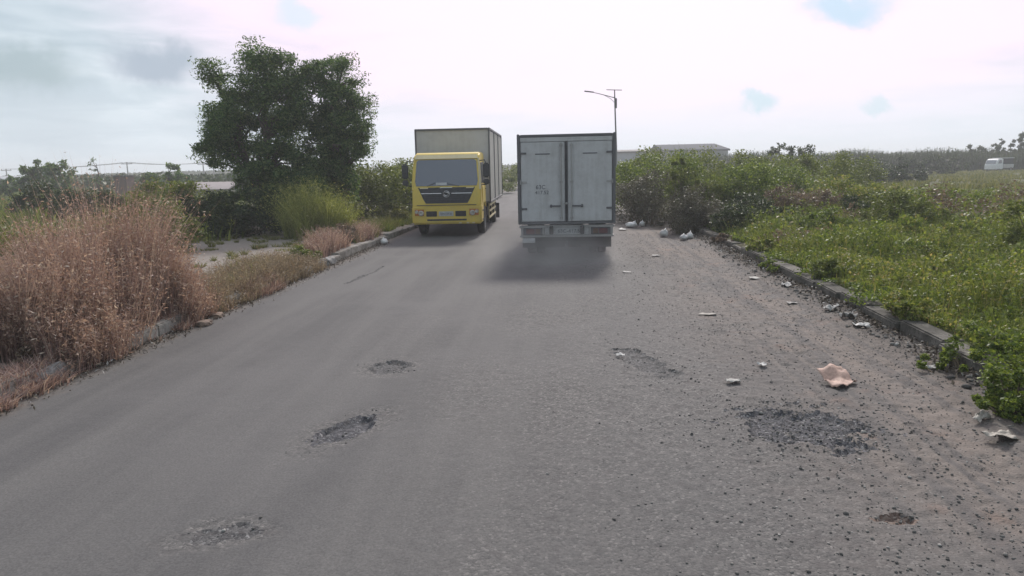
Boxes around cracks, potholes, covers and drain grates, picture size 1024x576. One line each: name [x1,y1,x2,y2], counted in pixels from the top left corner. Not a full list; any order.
pothole [869,512,919,525]
pothole [367,359,414,375]
pothole [604,345,685,381]
crack [344,266,384,284]
pothole [710,399,907,457]
pothole [305,414,382,447]
pothole [172,522,265,546]
